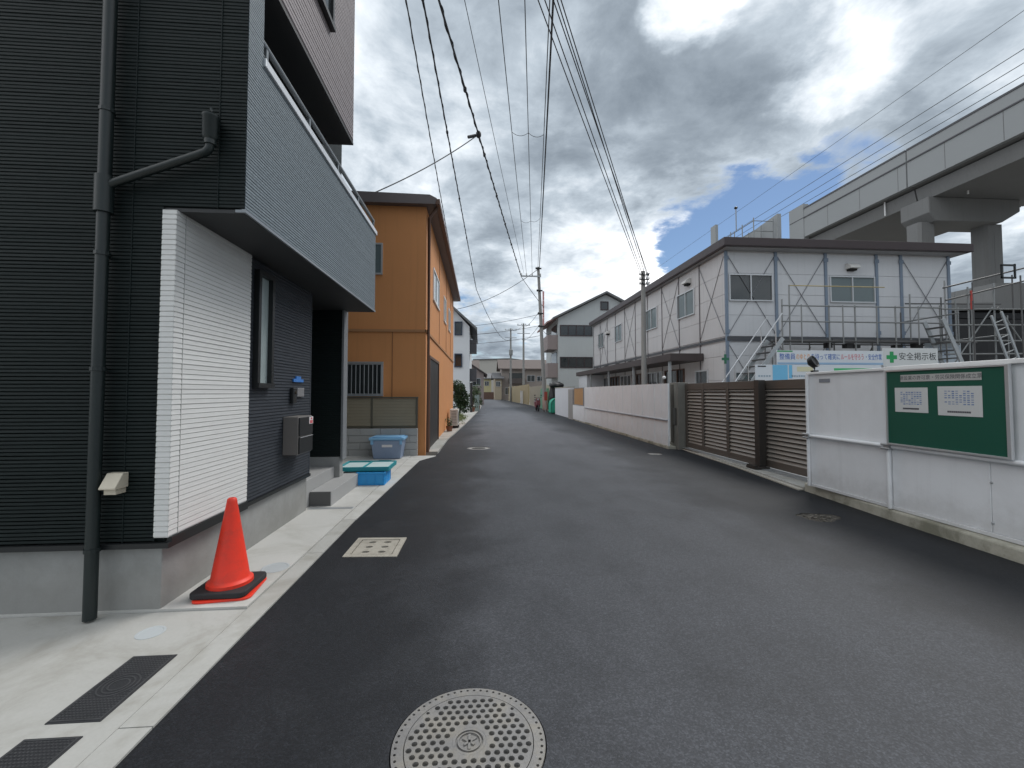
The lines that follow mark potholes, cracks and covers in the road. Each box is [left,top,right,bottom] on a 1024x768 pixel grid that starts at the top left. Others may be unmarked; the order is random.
manhole cover [390,688,546,768]
